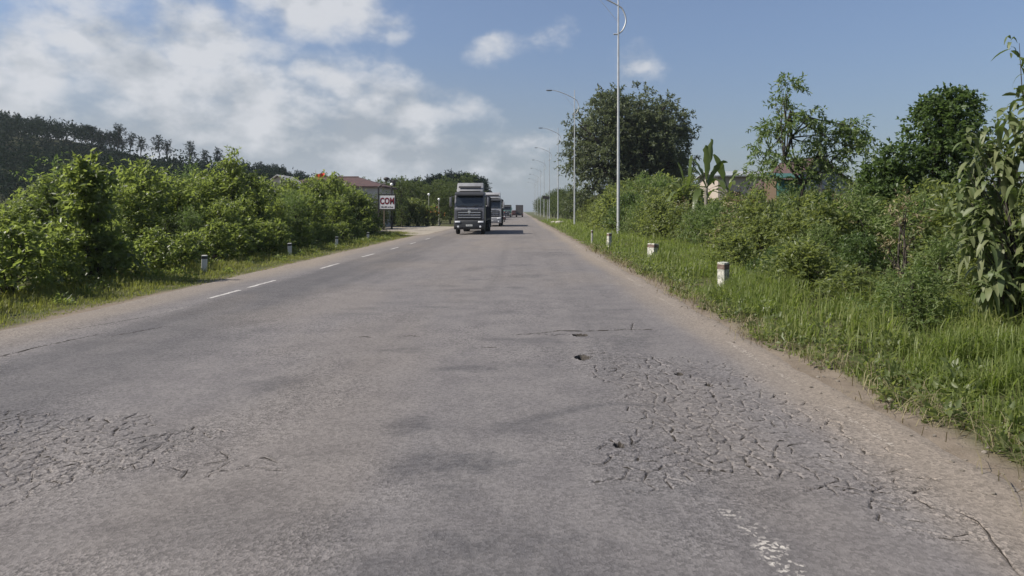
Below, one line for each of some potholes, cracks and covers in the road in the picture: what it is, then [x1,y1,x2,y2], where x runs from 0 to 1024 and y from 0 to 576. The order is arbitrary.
crack [589,350,1012,567]
crack [517,324,651,335]
crack [0,411,281,506]
crack [0,316,160,357]
